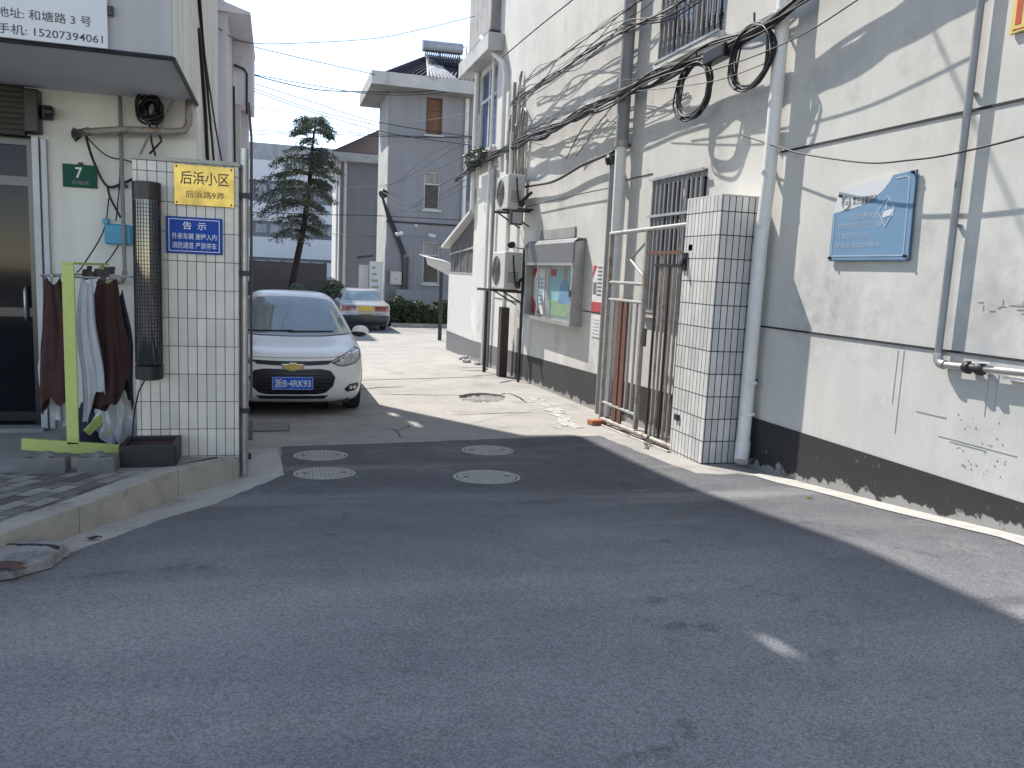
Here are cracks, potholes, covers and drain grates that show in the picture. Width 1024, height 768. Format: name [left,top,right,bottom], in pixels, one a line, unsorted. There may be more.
manhole cover [292,467,357,480]
manhole cover [292,450,349,461]
crack [365,367,528,403]
manhole cover [460,445,514,455]
drain grate [253,422,290,432]
pothole [458,393,506,403]
manhole cover [452,470,522,484]
